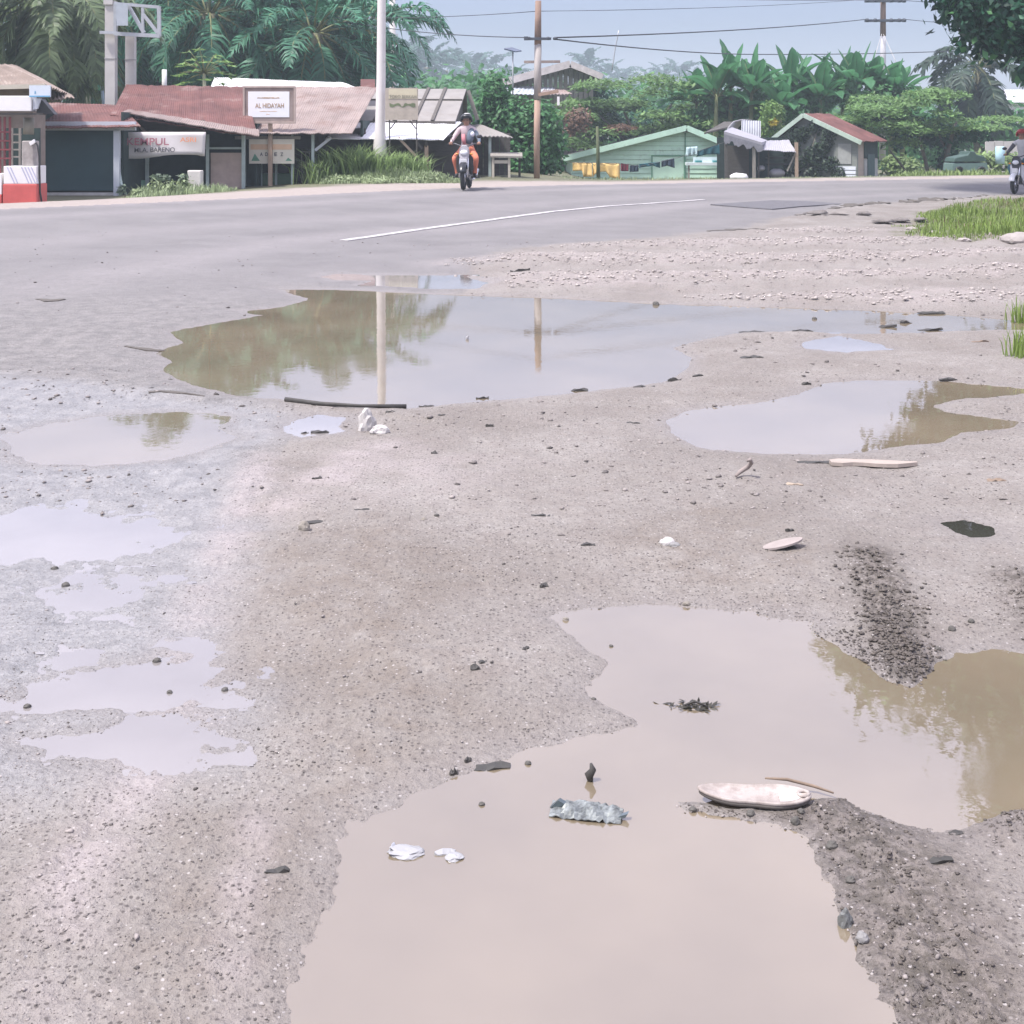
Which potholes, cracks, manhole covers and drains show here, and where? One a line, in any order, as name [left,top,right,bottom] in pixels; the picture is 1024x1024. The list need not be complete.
pothole [940,518,999,538]
pothole [156,288,1024,409]
pothole [9,568,196,654]
pothole [0,637,275,720]
pothole [279,601,1024,1024]
pothole [11,710,257,776]
pothole [0,411,241,467]
pothole [0,499,224,573]
pothole [666,378,1024,455]
pothole [277,413,351,439]
